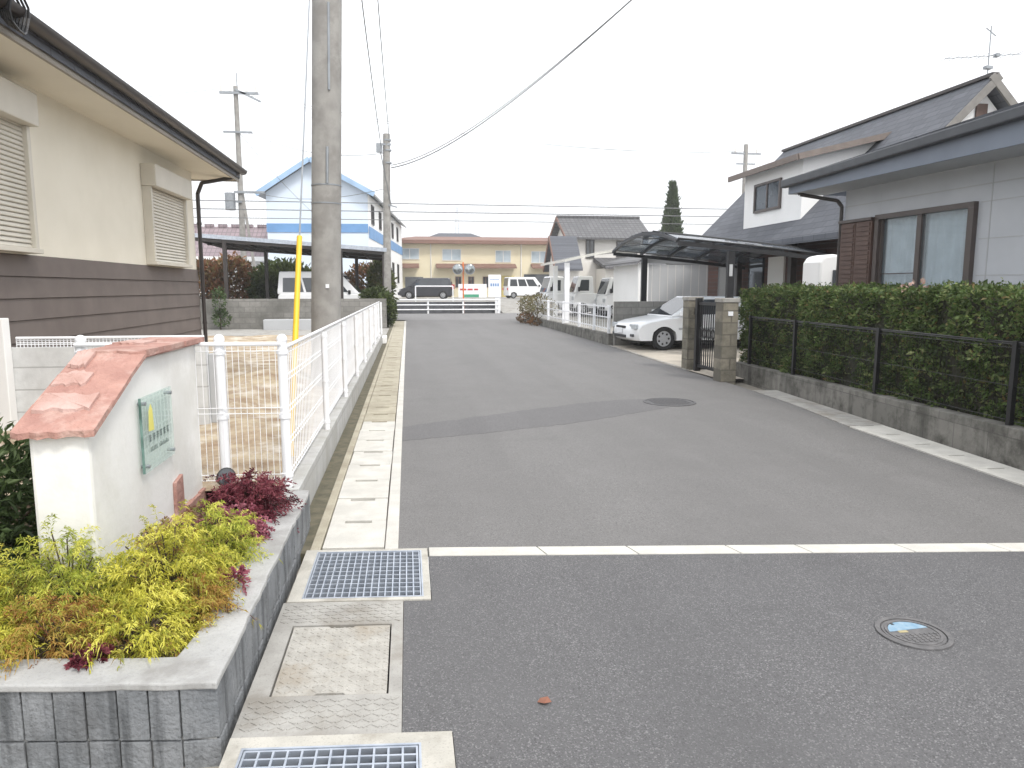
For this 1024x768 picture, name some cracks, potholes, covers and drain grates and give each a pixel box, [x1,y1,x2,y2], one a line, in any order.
manhole cover [875,616,954,651]
drain grate [287,548,431,613]
utility cover [231,600,404,738]
manhole cover [643,398,696,406]
drain grate [219,731,456,768]
